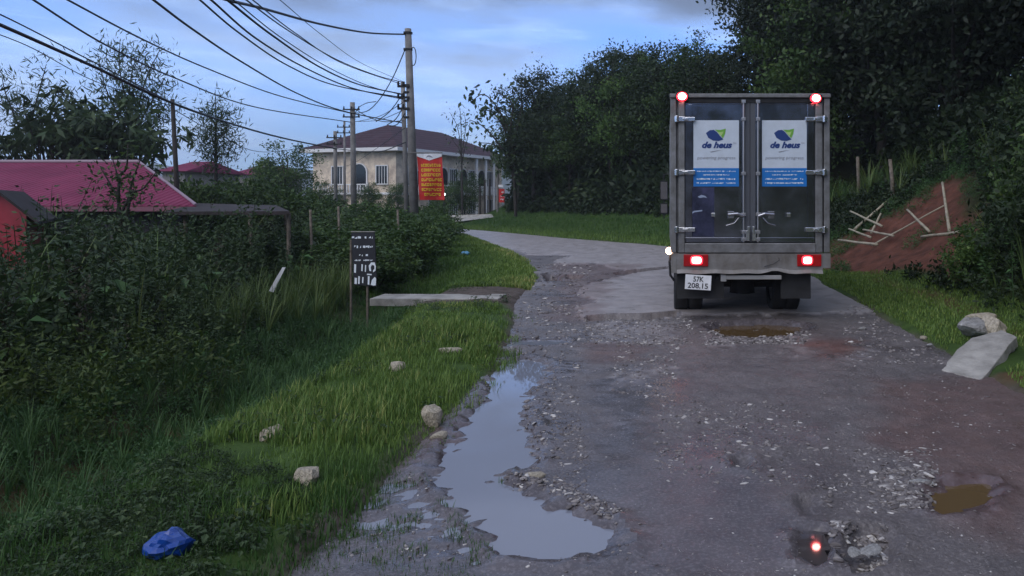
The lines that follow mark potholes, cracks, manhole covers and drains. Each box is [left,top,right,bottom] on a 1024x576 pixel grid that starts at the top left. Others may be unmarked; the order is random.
pothole [320,354,637,576]
pothole [783,520,840,569]
pothole [913,472,1015,519]
pothole [699,318,815,338]
